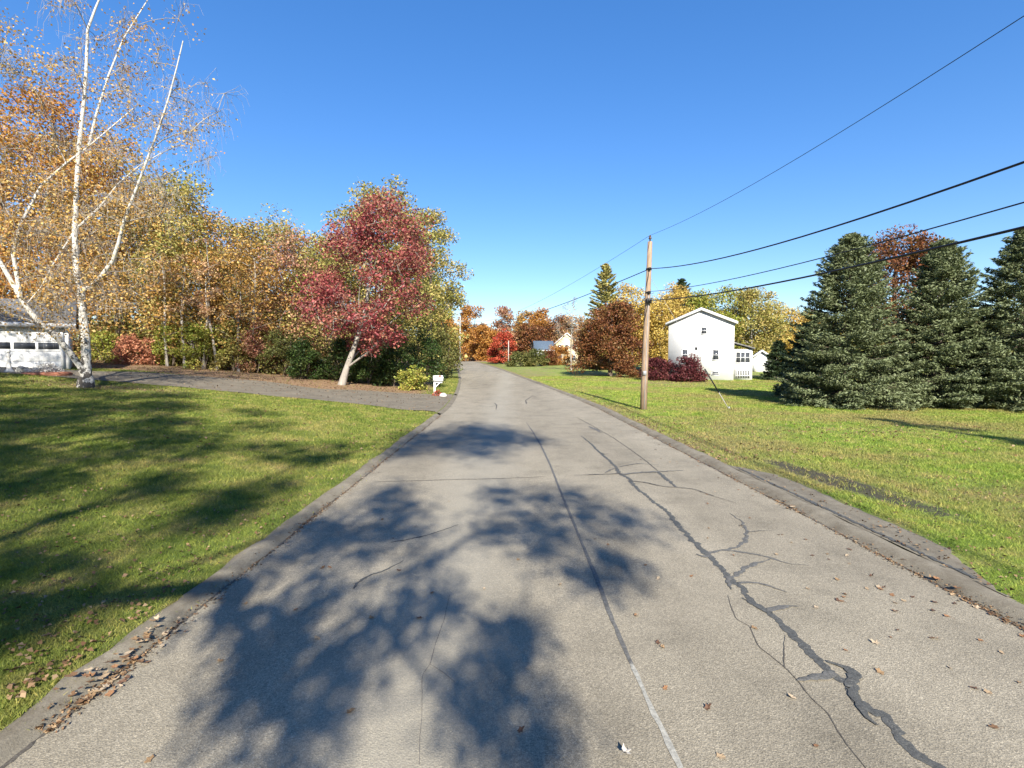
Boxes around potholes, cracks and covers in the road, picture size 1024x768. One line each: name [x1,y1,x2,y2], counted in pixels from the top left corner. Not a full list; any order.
crack [737,467,976,579]
crack [419,595,456,765]
crack [728,597,866,768]
crack [353,561,402,588]
crack [580,419,677,487]
